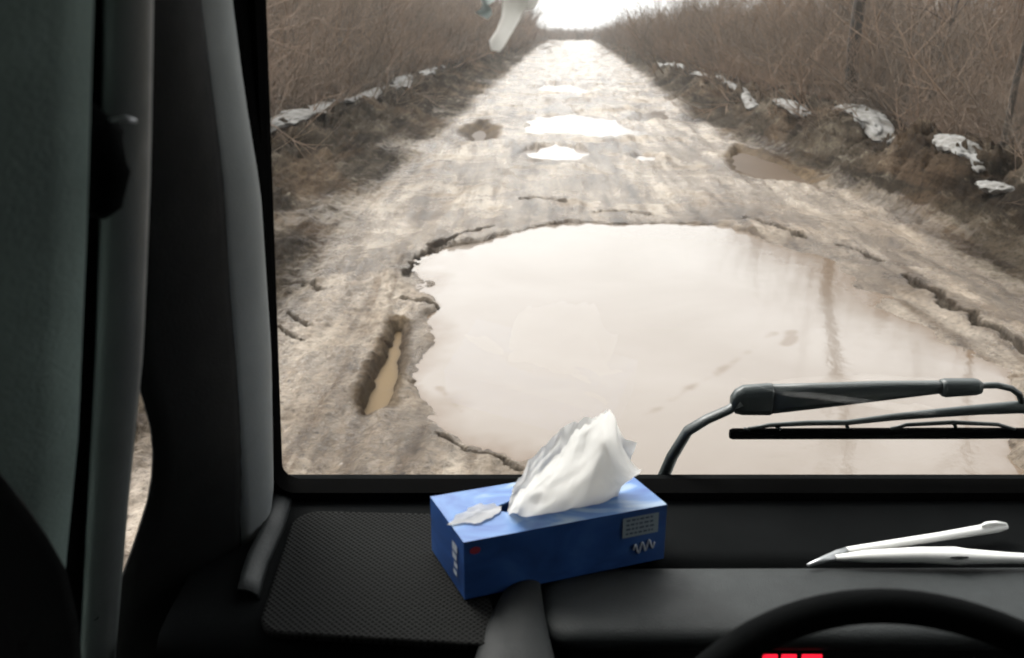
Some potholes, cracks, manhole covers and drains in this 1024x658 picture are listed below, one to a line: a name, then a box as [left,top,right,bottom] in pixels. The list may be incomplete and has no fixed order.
pothole [511,111,679,138]
pothole [513,140,598,162]
crack [832,243,1024,355]
pothole [454,117,503,142]
crack [434,430,525,472]
pothole [721,143,832,185]
crack [517,195,569,203]
pothole [341,216,1024,474]
